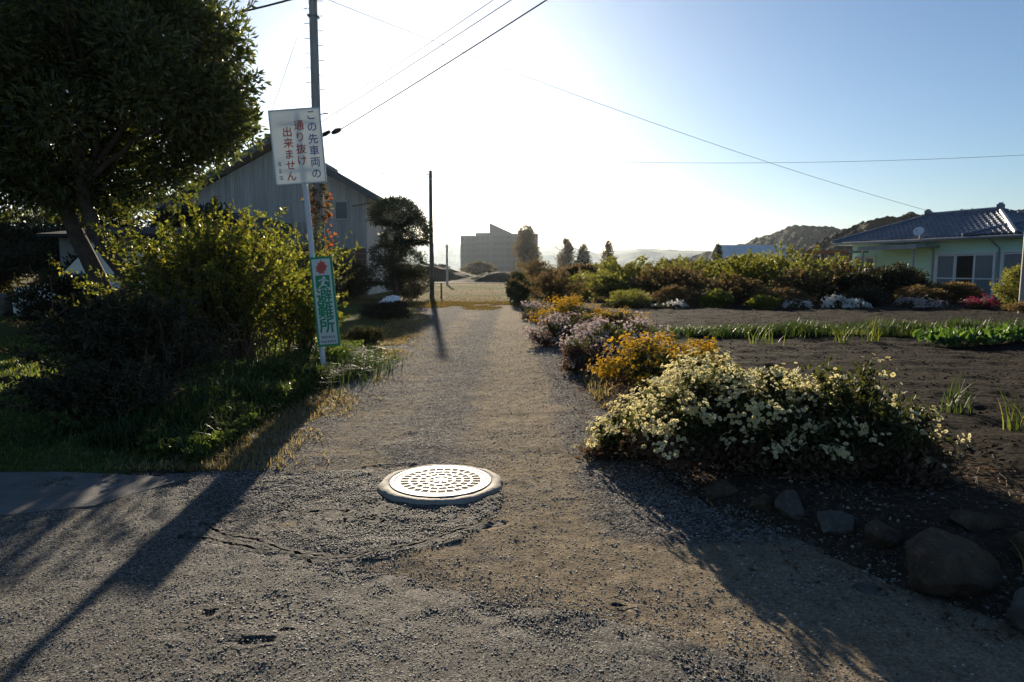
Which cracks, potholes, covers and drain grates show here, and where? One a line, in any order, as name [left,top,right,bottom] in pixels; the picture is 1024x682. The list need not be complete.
crack [182,508,504,564]
manhole cover [377,464,503,505]
pothole [221,631,287,651]
